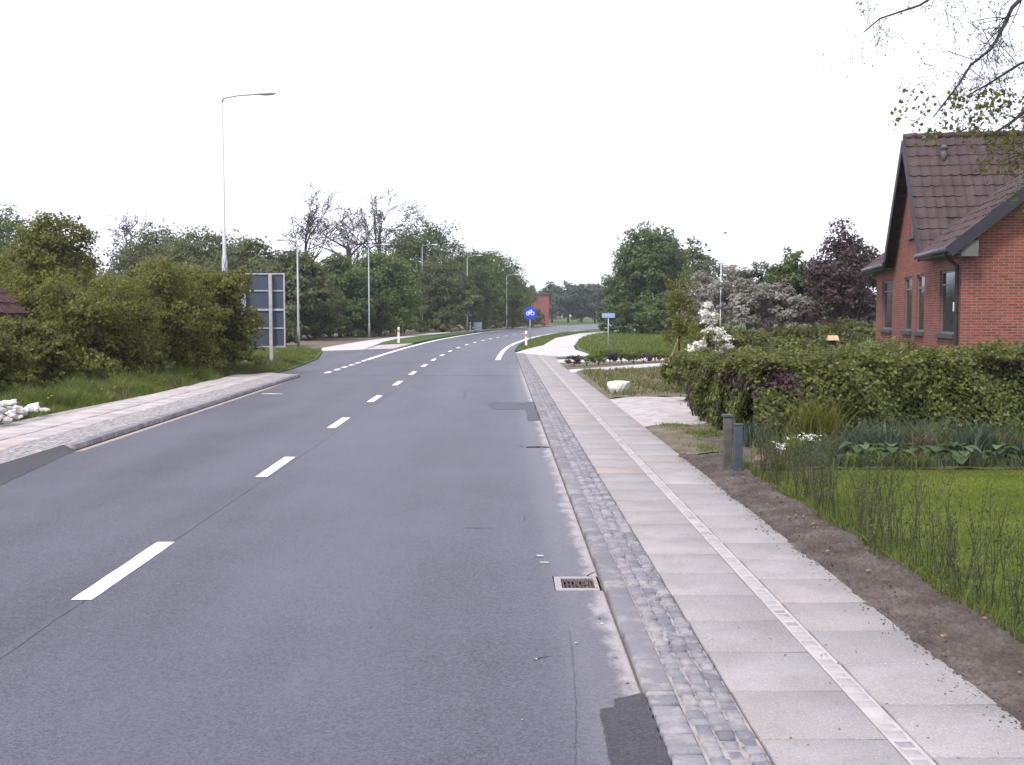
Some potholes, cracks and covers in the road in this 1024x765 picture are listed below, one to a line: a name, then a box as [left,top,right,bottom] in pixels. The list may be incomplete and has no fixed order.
crack [569,631,577,765]
drain grate [554,576,600,591]
